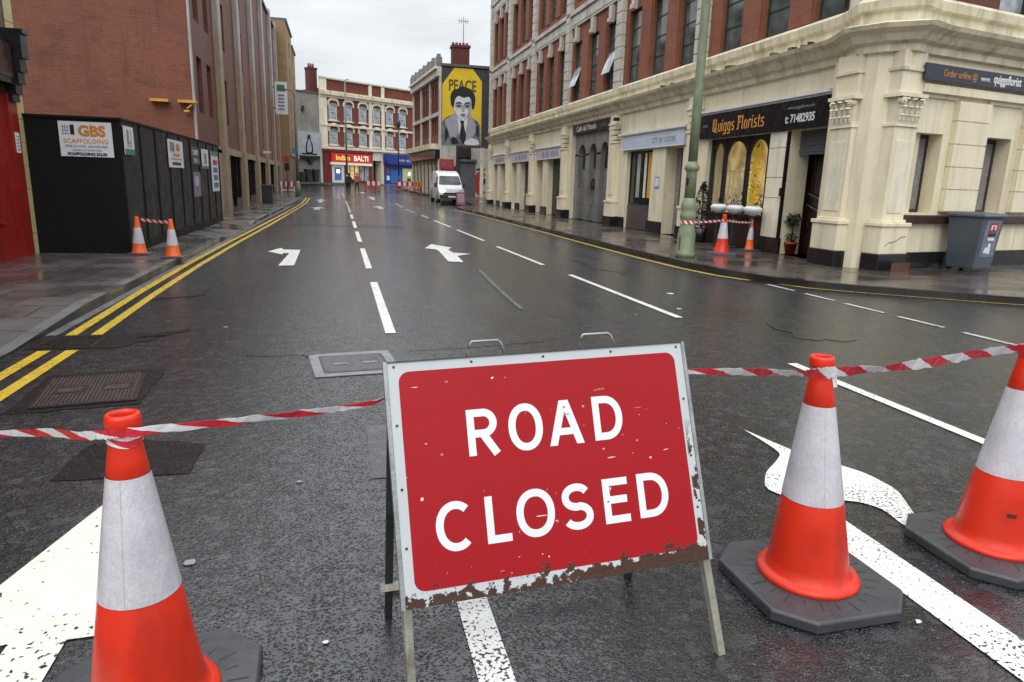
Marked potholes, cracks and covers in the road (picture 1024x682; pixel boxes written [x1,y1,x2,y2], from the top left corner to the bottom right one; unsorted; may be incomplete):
manhole cover [27,371,147,409]
manhole cover [309,350,395,378]
